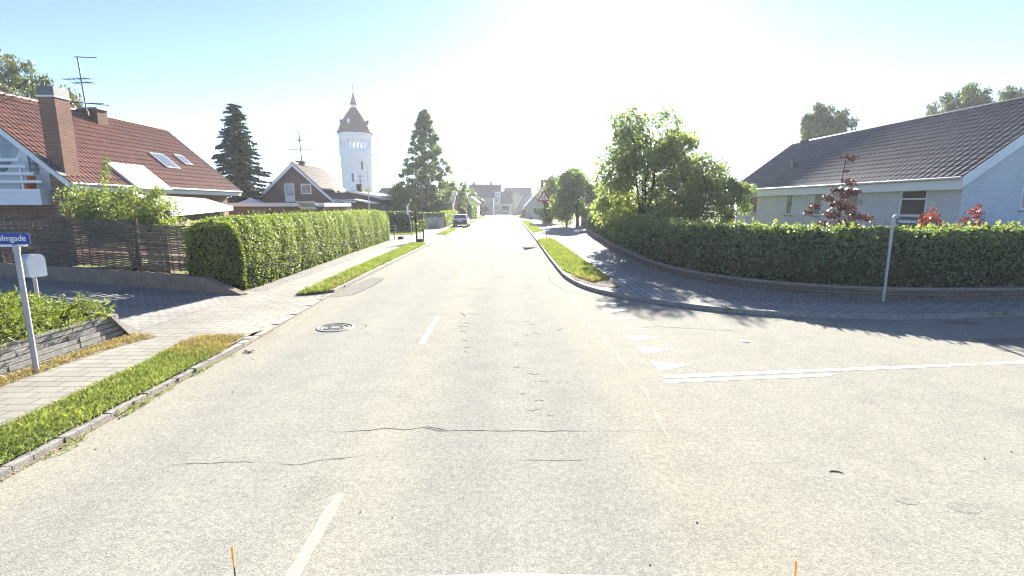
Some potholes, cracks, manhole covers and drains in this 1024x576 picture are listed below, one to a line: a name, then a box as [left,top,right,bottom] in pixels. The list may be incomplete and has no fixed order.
manhole cover [315,323,354,332]
crack [328,393,566,432]
